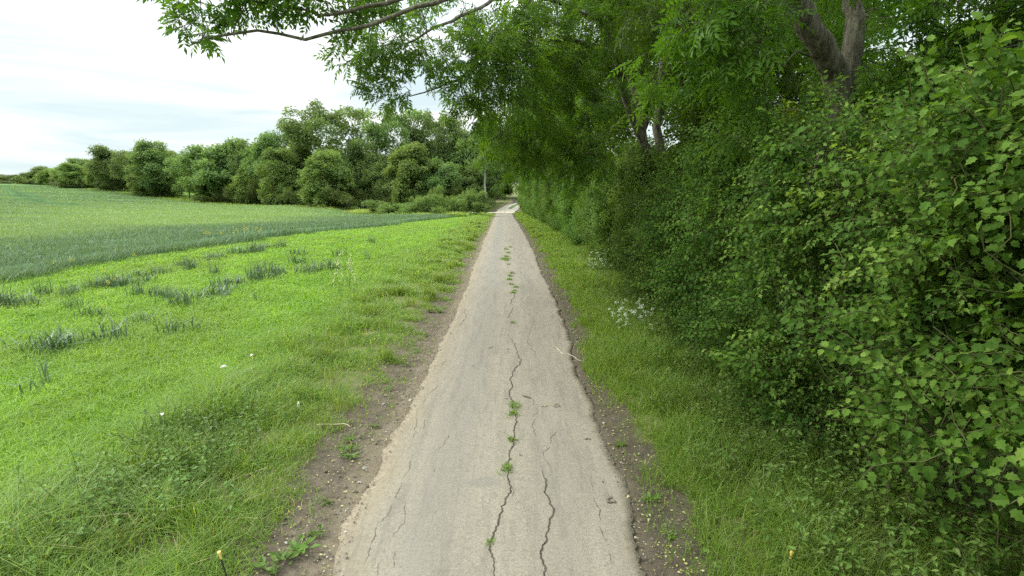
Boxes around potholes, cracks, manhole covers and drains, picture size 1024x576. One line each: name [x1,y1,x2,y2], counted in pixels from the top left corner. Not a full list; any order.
crack [488,274,557,576]
crack [364,459,412,575]
